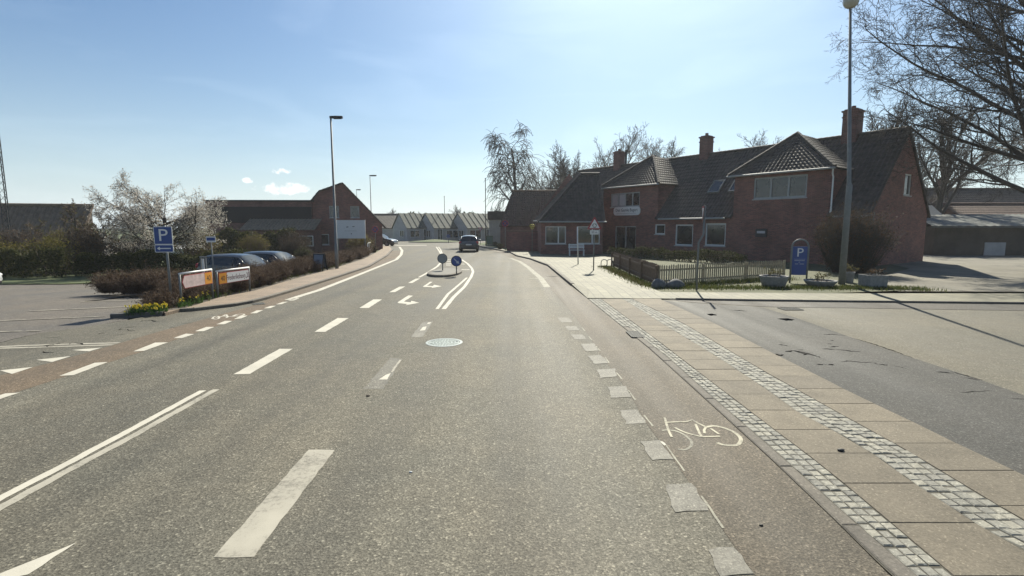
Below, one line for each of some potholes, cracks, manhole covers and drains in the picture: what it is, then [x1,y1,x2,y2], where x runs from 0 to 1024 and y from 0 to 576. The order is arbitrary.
manhole cover [426,338,463,347]
crack [778,334,983,393]
